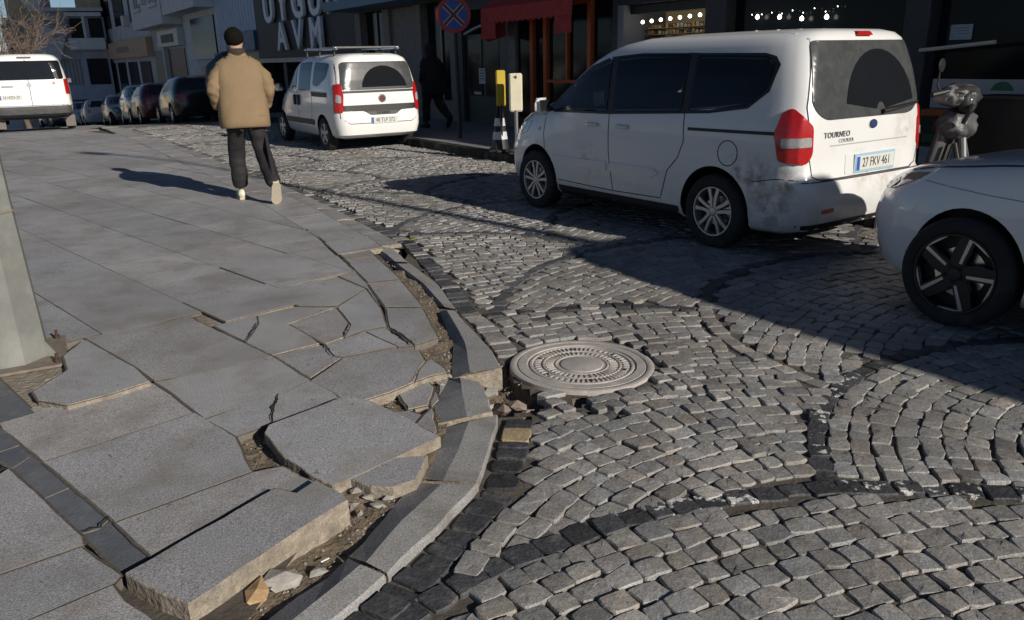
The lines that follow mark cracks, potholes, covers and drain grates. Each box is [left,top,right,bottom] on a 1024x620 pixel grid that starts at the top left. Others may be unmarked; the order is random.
manhole cover [509,340,664,399]
pothole [482,363,544,420]
crack [389,327,425,375]
